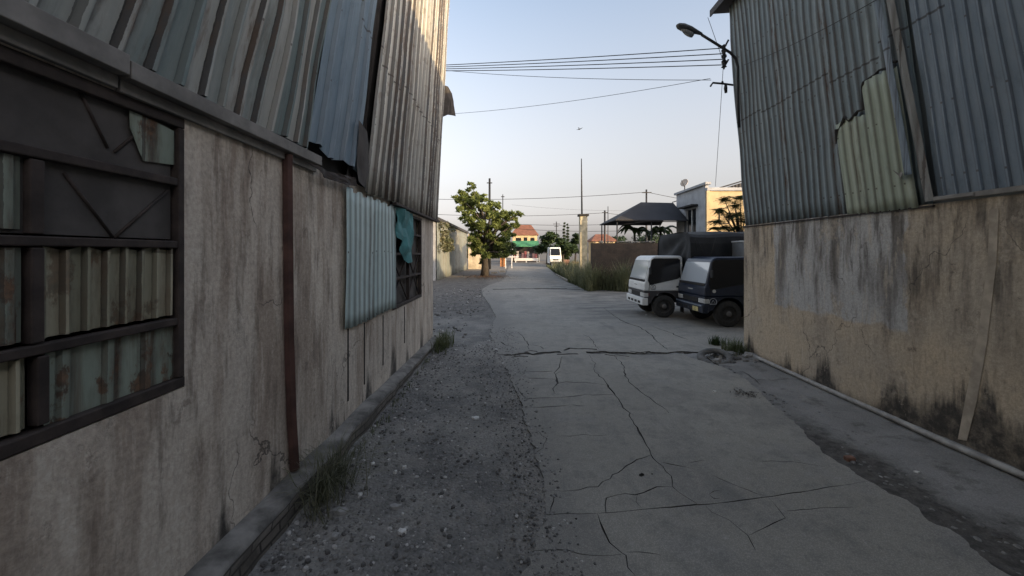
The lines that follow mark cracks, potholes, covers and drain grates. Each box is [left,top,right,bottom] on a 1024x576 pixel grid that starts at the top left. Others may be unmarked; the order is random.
crack [518,337,841,573]
